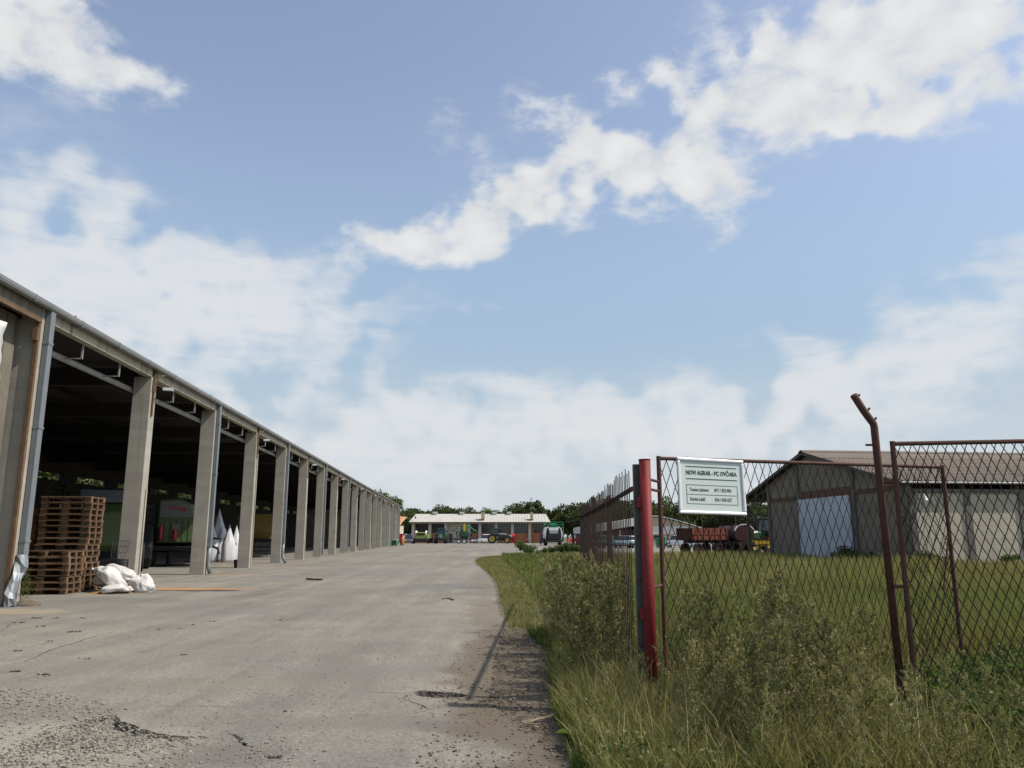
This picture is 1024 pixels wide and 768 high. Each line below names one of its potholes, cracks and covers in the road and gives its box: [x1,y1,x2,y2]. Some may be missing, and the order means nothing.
pothole [0,715,212,768]
crack [2,628,128,674]
pothole [414,690,469,698]
crack [228,733,274,748]
